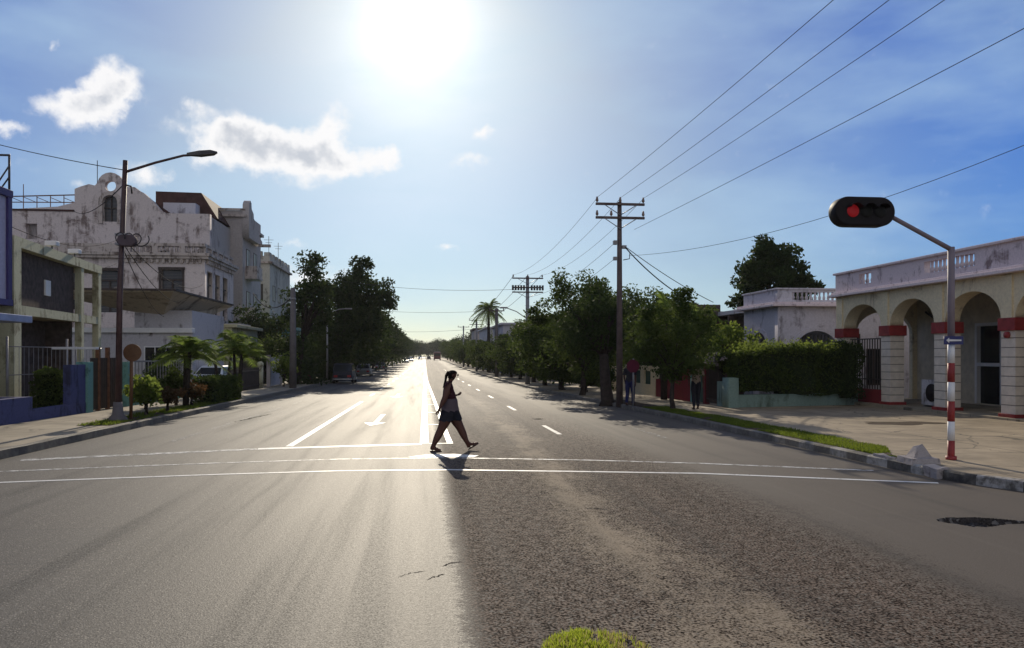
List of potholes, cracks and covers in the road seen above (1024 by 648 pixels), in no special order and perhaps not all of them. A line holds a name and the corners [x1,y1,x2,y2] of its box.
pothole [936,517,1024,527]
crack [399,561,462,580]
